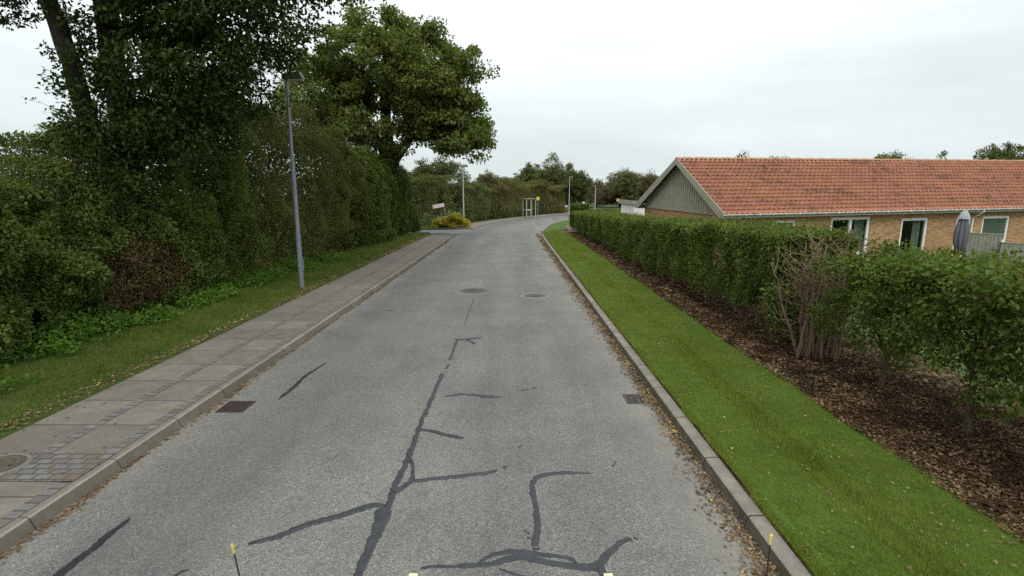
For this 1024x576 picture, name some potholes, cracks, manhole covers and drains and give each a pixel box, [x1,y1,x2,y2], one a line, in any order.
drain grate [622,394,650,404]
drain grate [215,401,256,413]
manhole cover [0,453,34,475]
